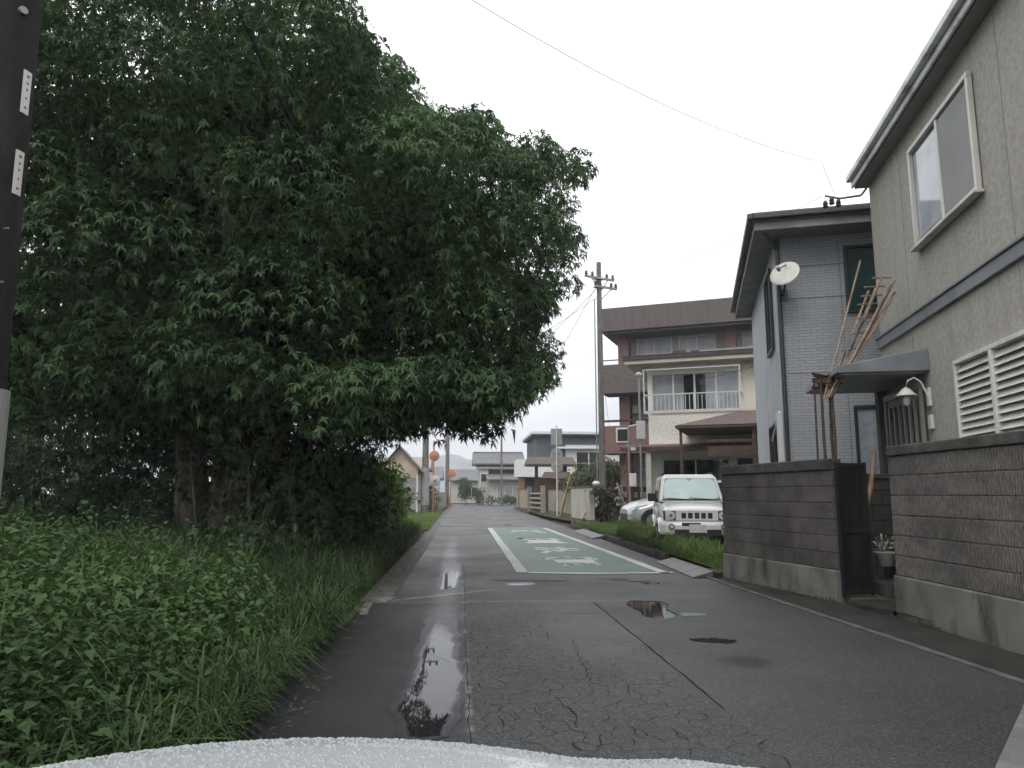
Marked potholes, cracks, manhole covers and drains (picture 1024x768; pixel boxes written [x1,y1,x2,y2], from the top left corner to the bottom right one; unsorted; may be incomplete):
crack [469,602,790,767]
pothole [626,600,677,619]
